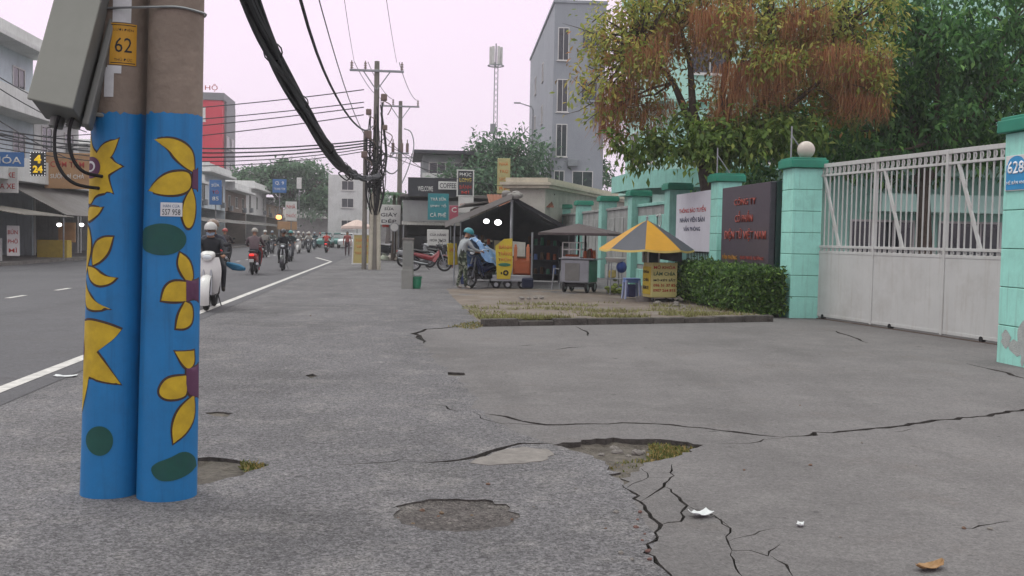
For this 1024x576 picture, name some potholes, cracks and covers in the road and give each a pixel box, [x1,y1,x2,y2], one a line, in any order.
crack [334,443,550,466]
pothole [554,437,702,485]
crack [966,363,1023,378]
crack [622,465,793,576]
crack [438,404,1024,444]
crack [410,326,462,343]
pothole [197,457,267,485]
